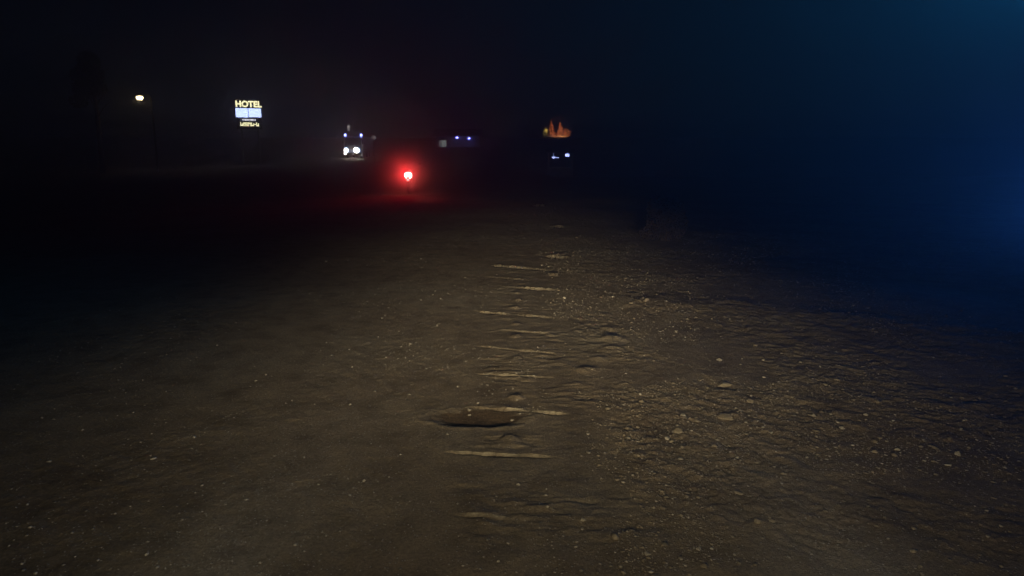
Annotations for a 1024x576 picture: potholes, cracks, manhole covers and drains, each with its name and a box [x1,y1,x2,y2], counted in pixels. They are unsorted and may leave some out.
pothole [420,406,539,428]
